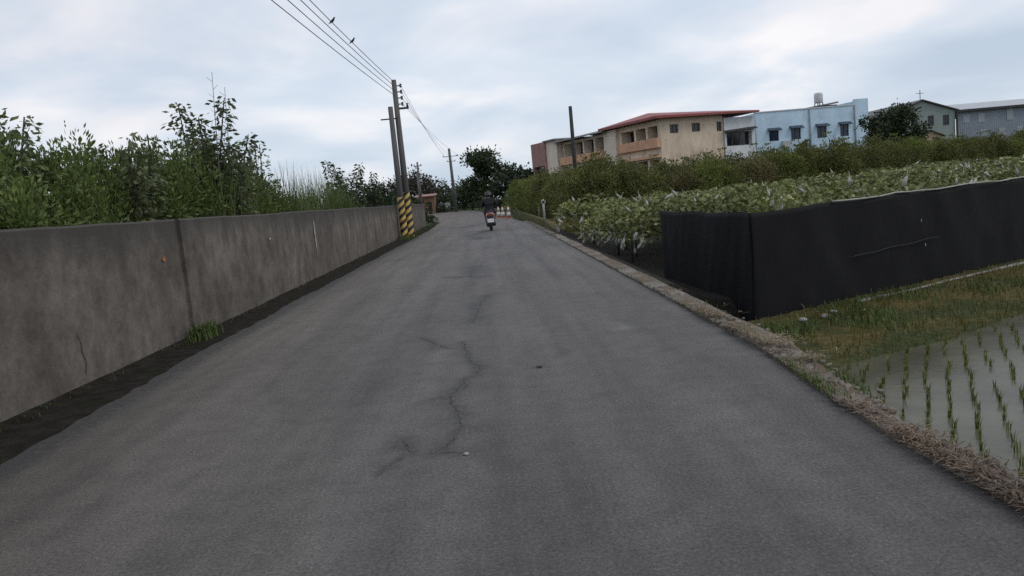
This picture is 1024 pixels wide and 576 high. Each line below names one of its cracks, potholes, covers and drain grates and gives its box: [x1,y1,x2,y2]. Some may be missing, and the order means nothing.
crack [420,337,481,455]
crack [378,439,411,474]
